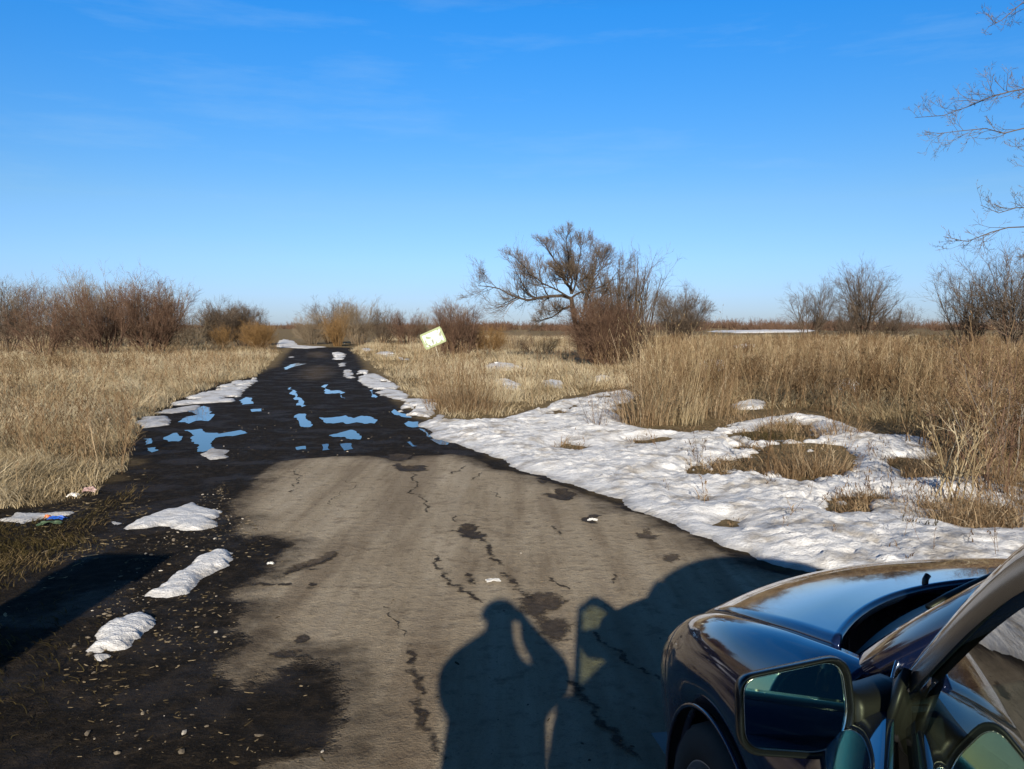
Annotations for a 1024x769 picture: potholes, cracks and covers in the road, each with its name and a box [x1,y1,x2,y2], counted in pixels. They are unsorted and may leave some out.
crack [407,472,429,512]
crack [383,606,447,760]
crack [593,632,660,679]
crack [568,680,638,756]
crack [433,528,570,603]
